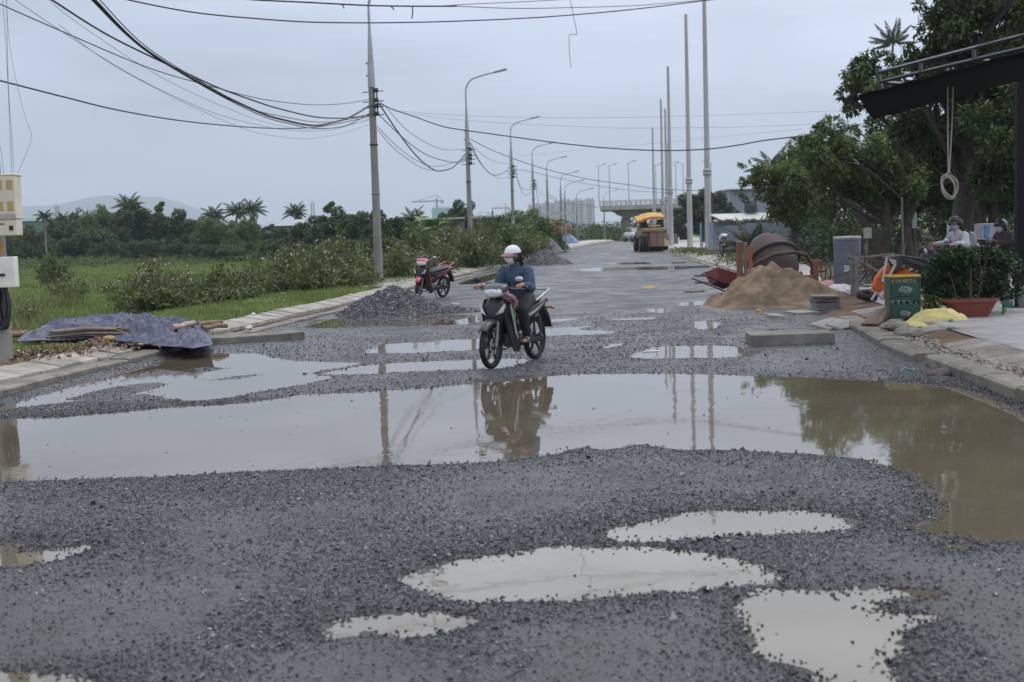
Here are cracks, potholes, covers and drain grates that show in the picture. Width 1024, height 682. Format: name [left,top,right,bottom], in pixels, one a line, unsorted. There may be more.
pothole [0,531,121,569]
pothole [0,350,373,410]
pothole [698,574,975,682]
pothole [616,341,767,359]
pothole [352,336,495,354]
pothole [284,597,510,648]
pothole [370,536,814,608]
pothole [0,369,1024,546]
